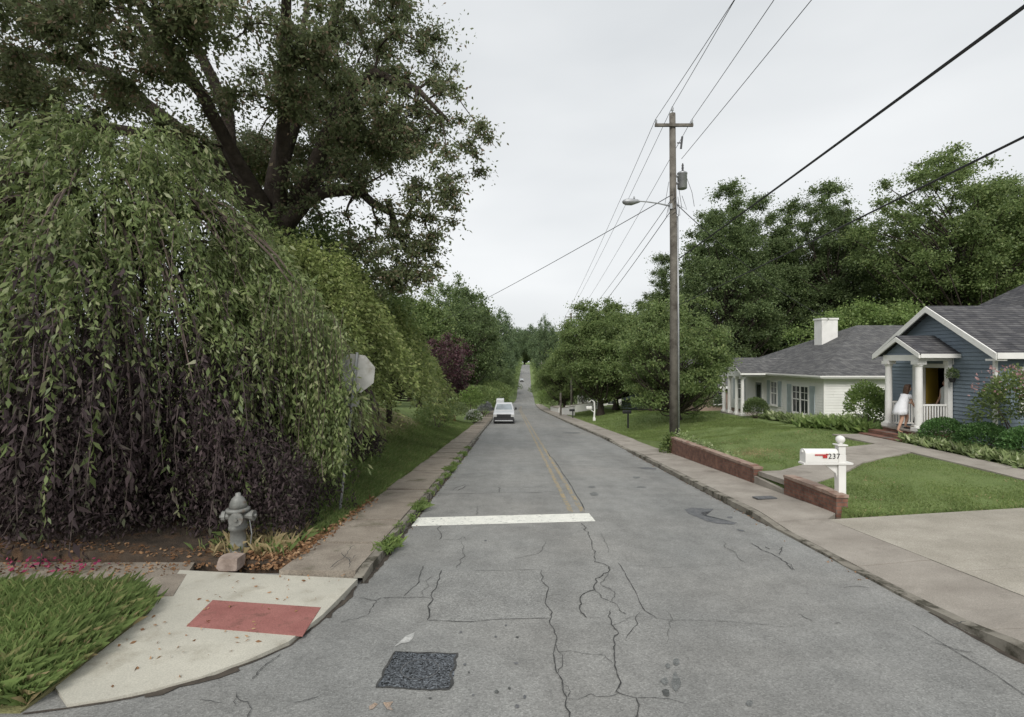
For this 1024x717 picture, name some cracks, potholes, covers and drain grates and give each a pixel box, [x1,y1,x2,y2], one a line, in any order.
crack [342,524,783,717]
